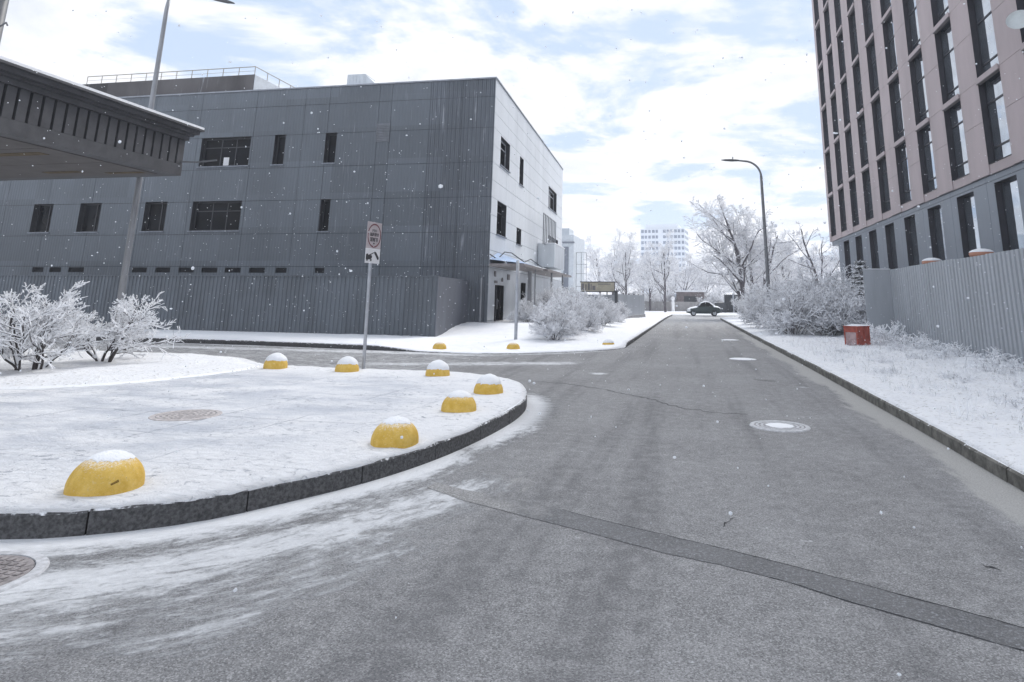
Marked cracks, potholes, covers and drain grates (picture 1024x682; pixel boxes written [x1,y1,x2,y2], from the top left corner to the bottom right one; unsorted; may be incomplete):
manhole cover [148,409,223,421]
crack [534,381,748,415]
manhole cover [749,420,811,432]
manhole cover [0,551,50,593]
